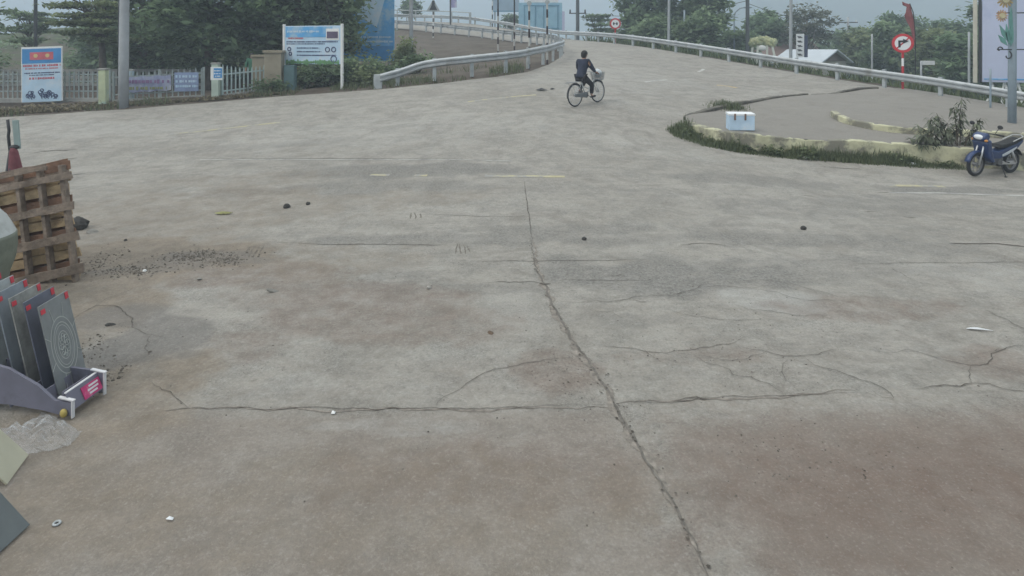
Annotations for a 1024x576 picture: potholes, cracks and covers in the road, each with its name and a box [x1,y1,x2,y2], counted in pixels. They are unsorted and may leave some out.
crack [76,287,163,357]
crack [874,345,1021,391]
crack [154,240,894,576]
